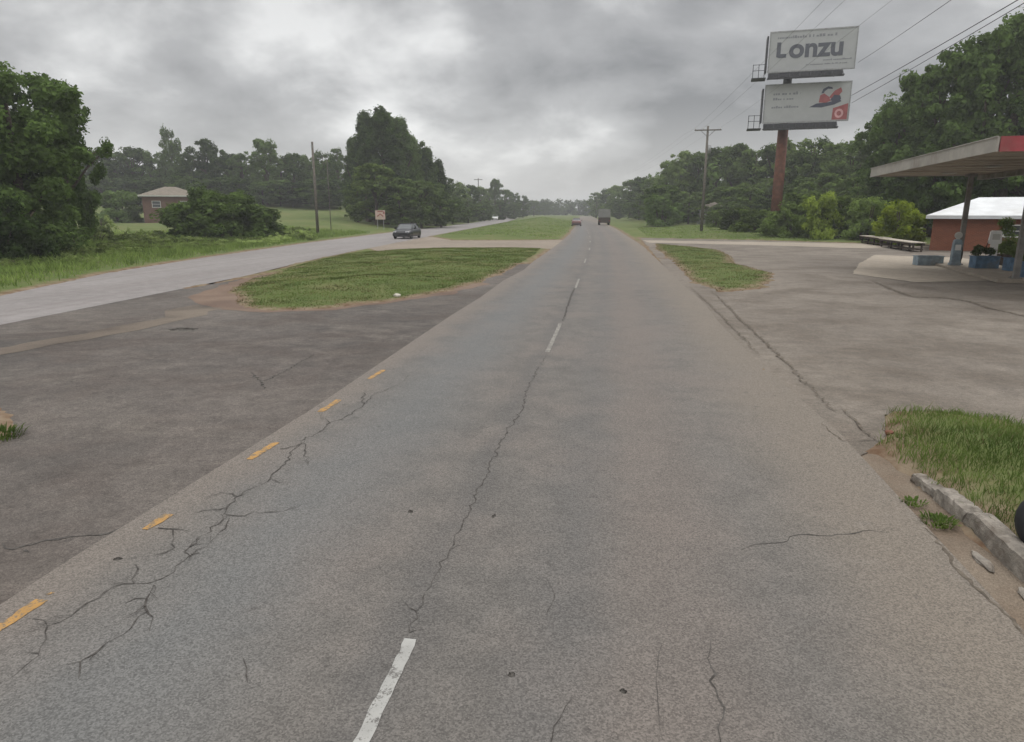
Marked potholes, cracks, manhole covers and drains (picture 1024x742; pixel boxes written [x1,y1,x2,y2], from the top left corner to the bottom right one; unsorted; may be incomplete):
crack [251,355,312,389]
crack [405,356,546,632]
crack [15,378,406,679]
crack [741,529,888,550]
crack [708,642,726,742]
crack [821,406,881,441]
